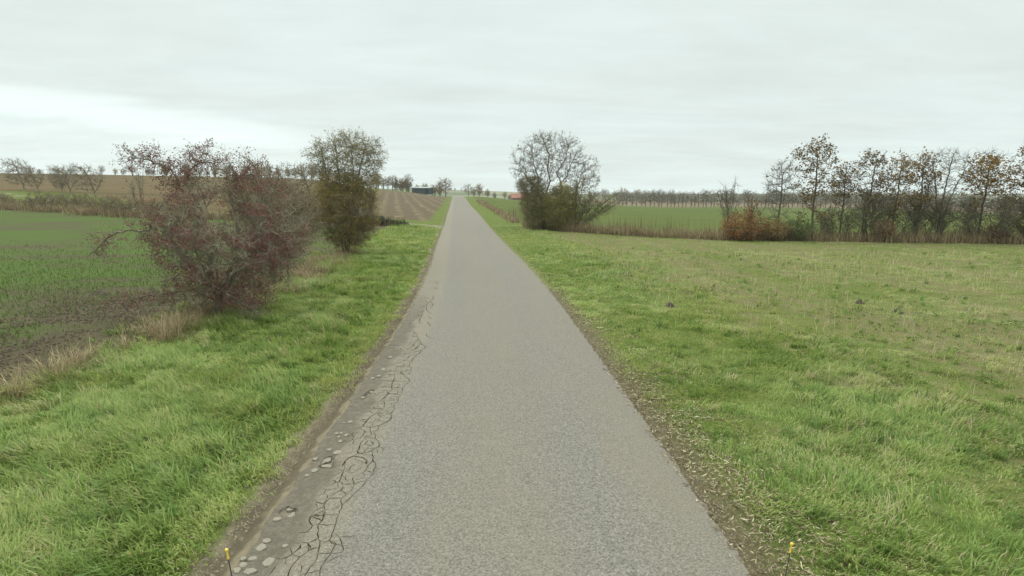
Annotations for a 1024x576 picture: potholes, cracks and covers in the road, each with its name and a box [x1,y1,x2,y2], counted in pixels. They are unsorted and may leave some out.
crack [270,331,426,576]
